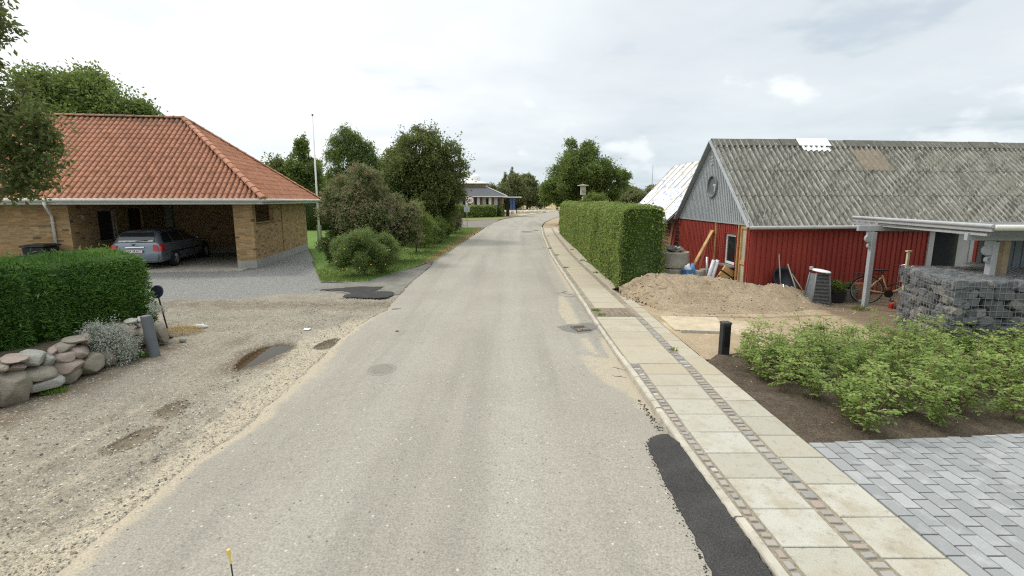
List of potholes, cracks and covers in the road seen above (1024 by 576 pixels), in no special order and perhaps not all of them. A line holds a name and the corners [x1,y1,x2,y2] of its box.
manhole cover [366,363,396,376]
pothole [151,399,194,419]
pothole [97,425,169,455]
pothole [312,337,340,350]
pothole [226,343,297,373]
